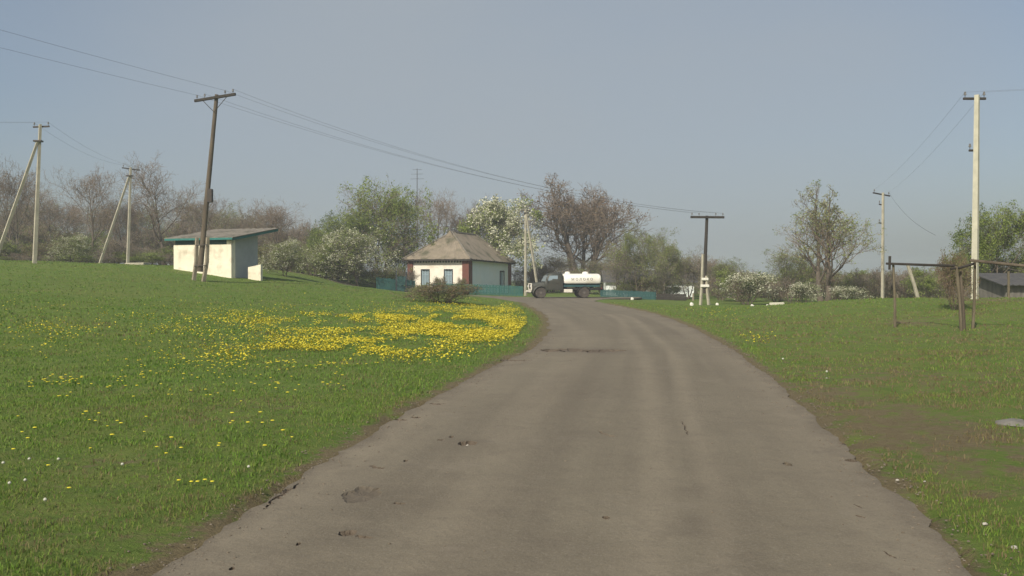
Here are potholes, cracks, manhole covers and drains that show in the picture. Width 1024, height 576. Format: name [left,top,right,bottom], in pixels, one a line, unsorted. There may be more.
crack [264,483,299,509]
pothole [341,486,382,503]
